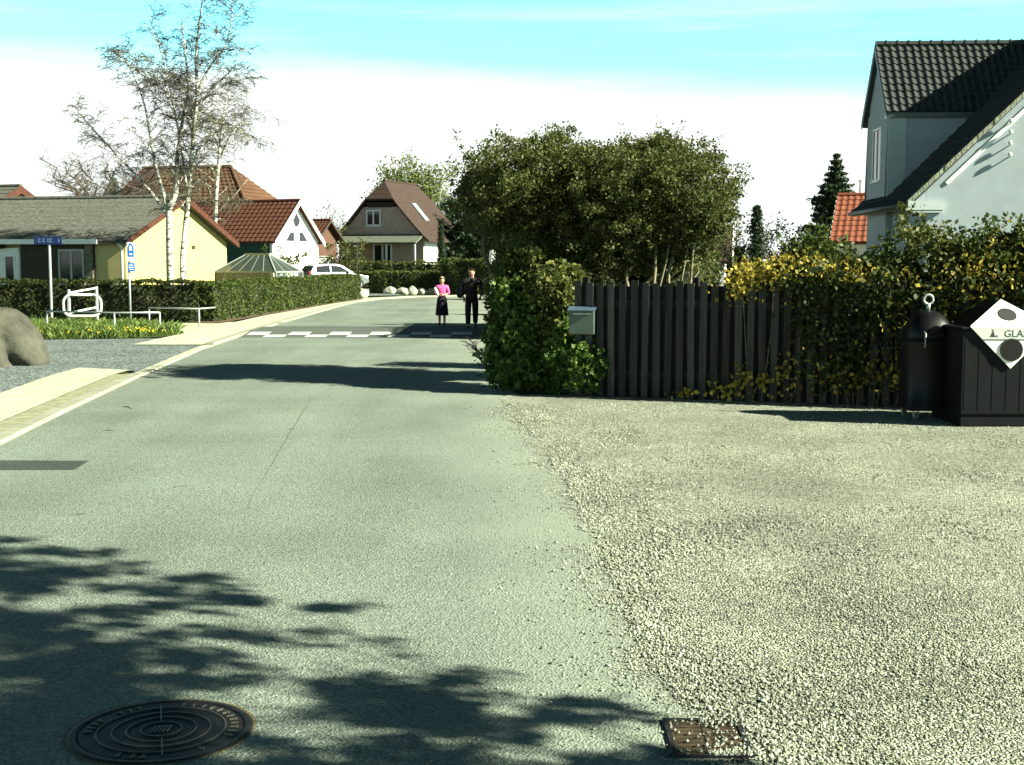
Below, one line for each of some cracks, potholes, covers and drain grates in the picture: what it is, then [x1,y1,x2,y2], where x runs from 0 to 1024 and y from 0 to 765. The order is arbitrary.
manhole cover [62,699,257,765]
crack [243,401,309,513]
drain grate [663,717,763,759]
